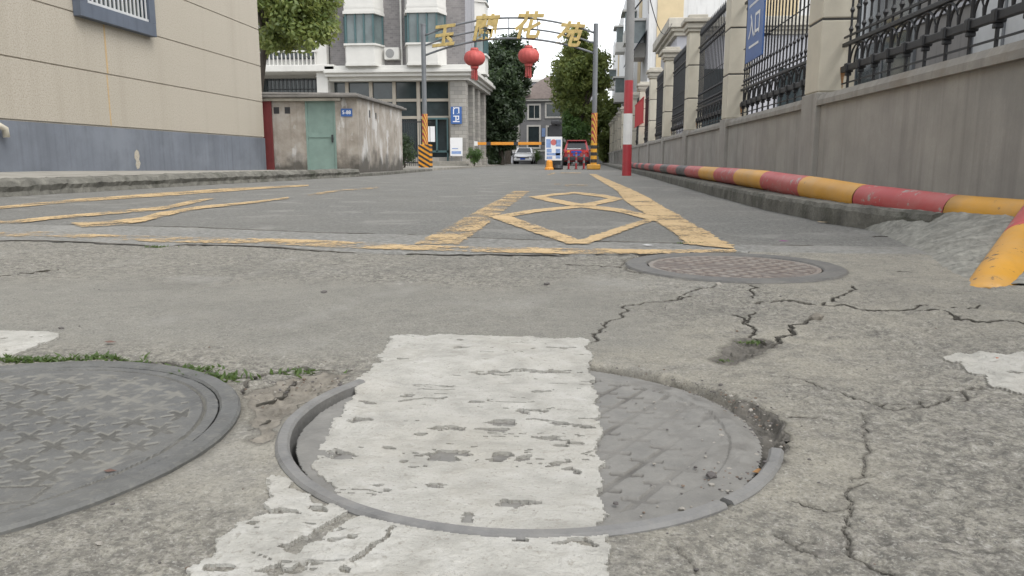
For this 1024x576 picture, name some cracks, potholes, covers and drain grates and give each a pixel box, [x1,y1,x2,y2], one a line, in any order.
crack [731,285,1024,348]
manhole cover [0,361,241,535]
pothole [712,338,778,365]
pothole [243,372,350,443]
manhole cover [625,252,849,284]
crack [775,535,818,558]
crack [591,287,714,343]
manhole cover [275,371,784,541]
crack [788,377,981,576]
